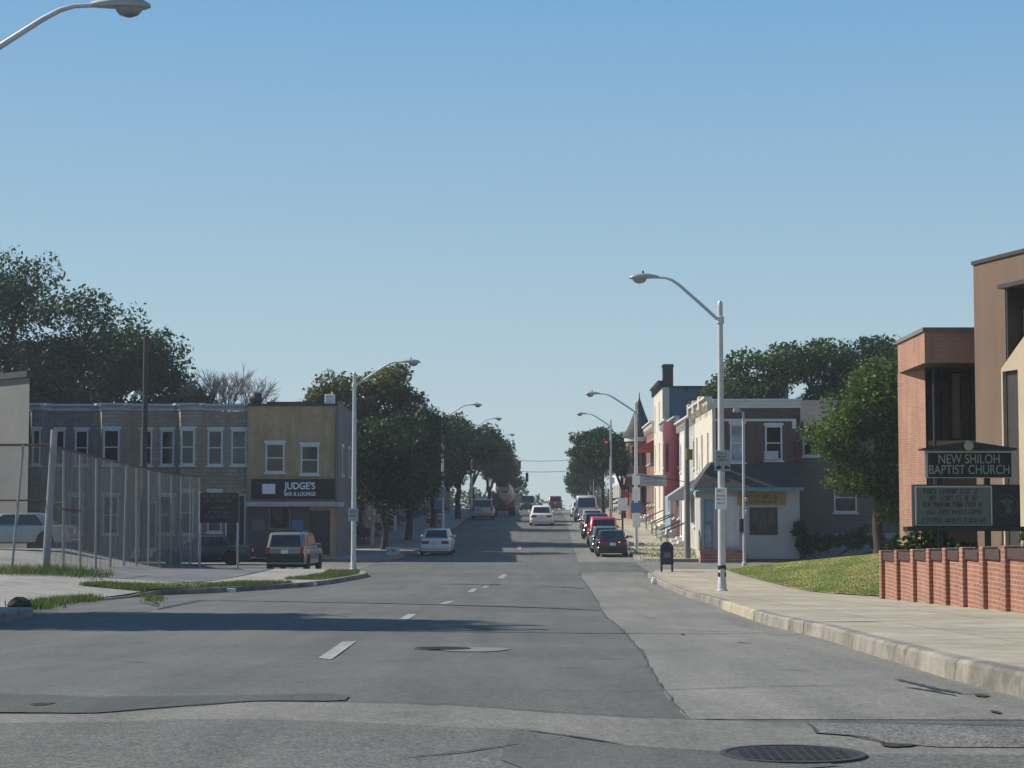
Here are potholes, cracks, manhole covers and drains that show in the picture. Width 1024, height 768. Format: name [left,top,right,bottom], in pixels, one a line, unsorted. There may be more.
manhole cover [720,744,867,764]
crack [898,679,987,695]
